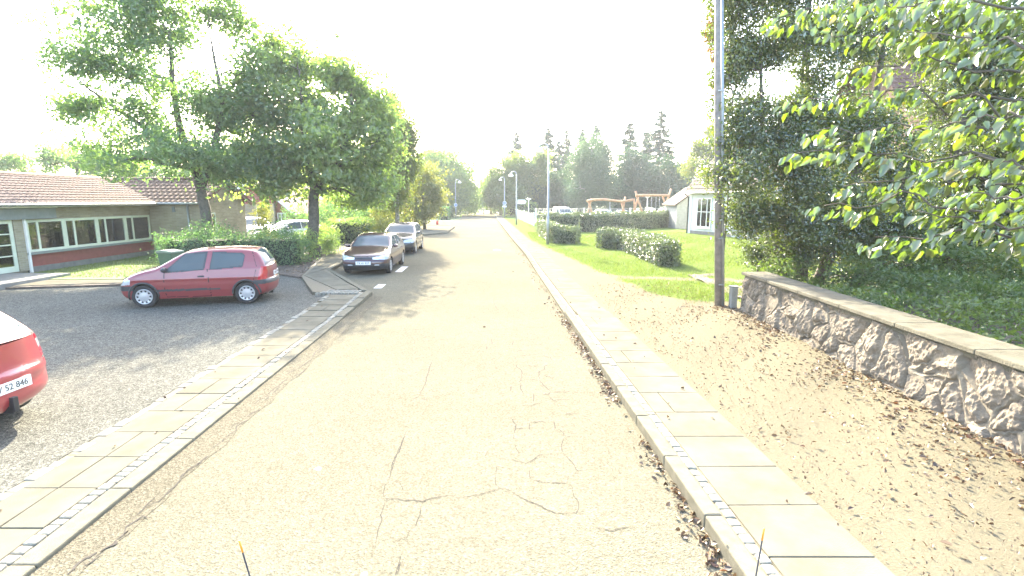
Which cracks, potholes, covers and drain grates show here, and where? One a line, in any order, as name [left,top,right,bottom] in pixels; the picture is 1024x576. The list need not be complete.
crack [374,278,625,575]
